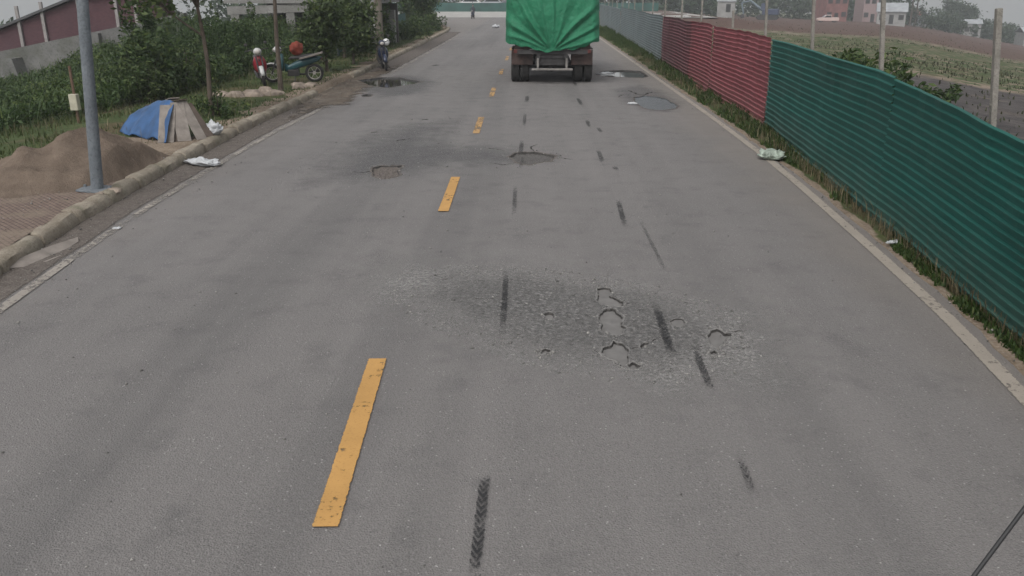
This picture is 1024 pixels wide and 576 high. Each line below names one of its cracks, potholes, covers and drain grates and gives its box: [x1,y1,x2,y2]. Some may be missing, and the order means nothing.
pothole [506,151,558,165]
pothole [370,165,404,179]
pothole [361,77,423,88]
pothole [669,317,688,327]
pothole [705,327,736,349]
pothole [632,95,680,111]
pothole [596,70,649,78]
pothole [598,340,631,369]
pothole [596,307,627,338]
pothole [595,287,627,308]
